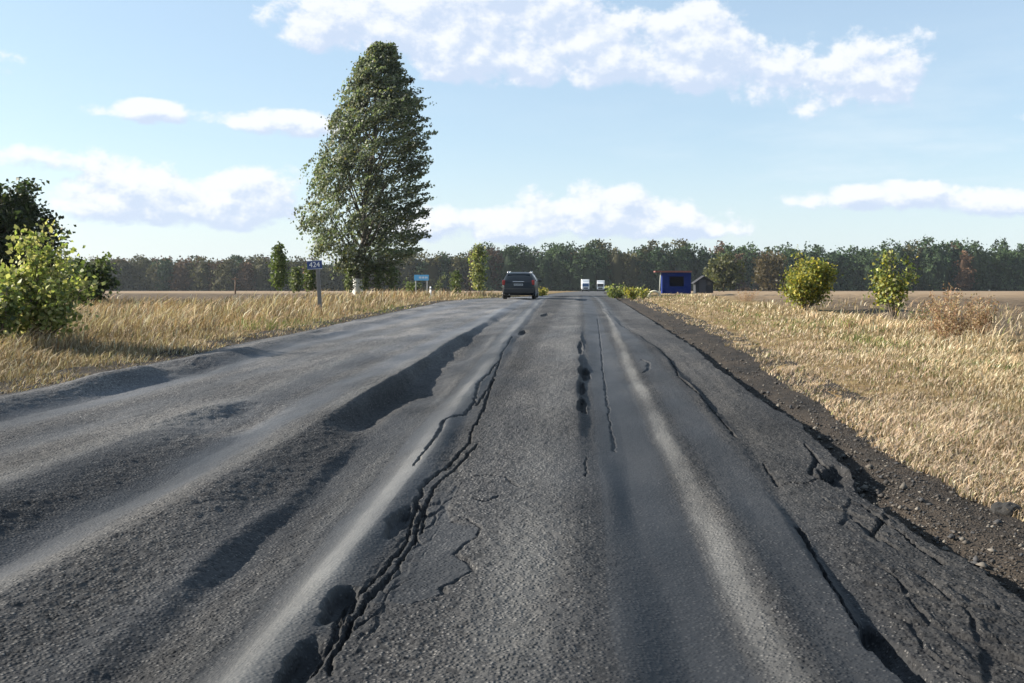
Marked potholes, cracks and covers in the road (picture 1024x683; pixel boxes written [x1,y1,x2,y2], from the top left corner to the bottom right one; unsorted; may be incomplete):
crack [762,443,1024,683]
pothole [578,379,586,396]
pothole [575,395,588,415]
crack [308,336,520,681]
crack [565,318,739,490]
pothole [577,365,592,383]
pothole [317,324,498,437]
pothole [816,464,858,493]
pothole [380,504,413,541]
pothole [311,582,363,629]
